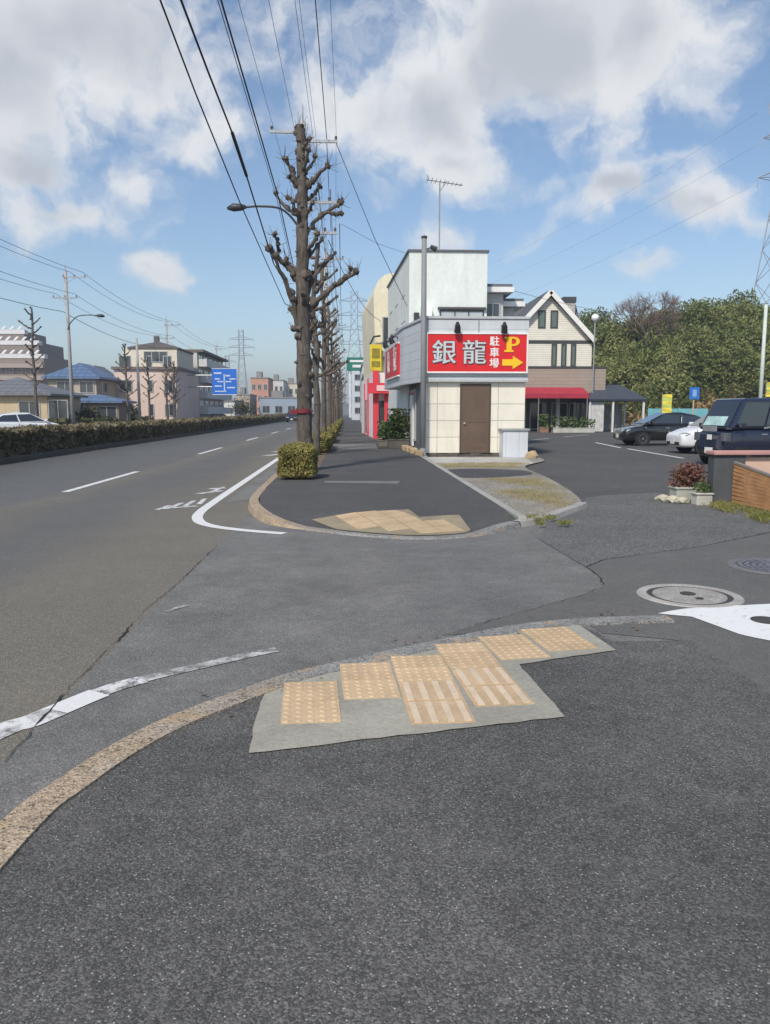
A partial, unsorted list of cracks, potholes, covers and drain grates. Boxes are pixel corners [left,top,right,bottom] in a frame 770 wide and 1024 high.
crack [1,546,217,765]
manhole cover [636,584,745,608]
manhole cover [726,558,770,574]
crack [467,532,768,627]
